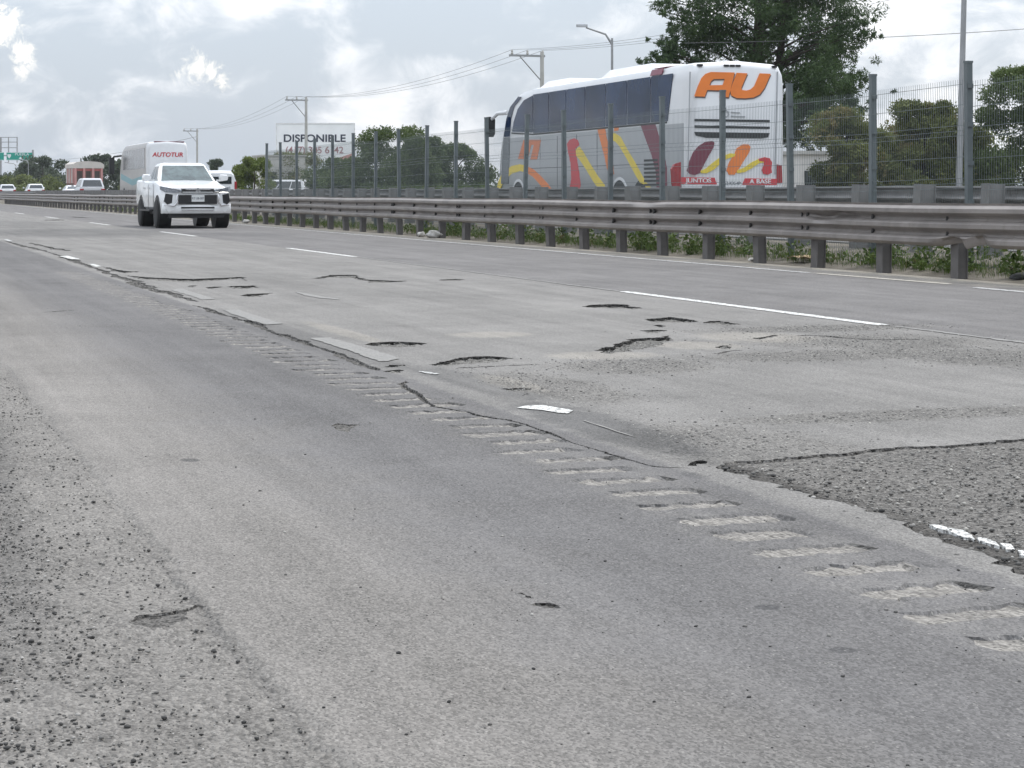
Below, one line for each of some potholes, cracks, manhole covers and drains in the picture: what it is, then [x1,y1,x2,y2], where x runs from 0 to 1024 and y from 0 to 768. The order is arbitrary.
pothole [129,604,201,628]
crack [398,364,681,468]
pothole [596,336,672,354]
pothole [430,356,514,366]
